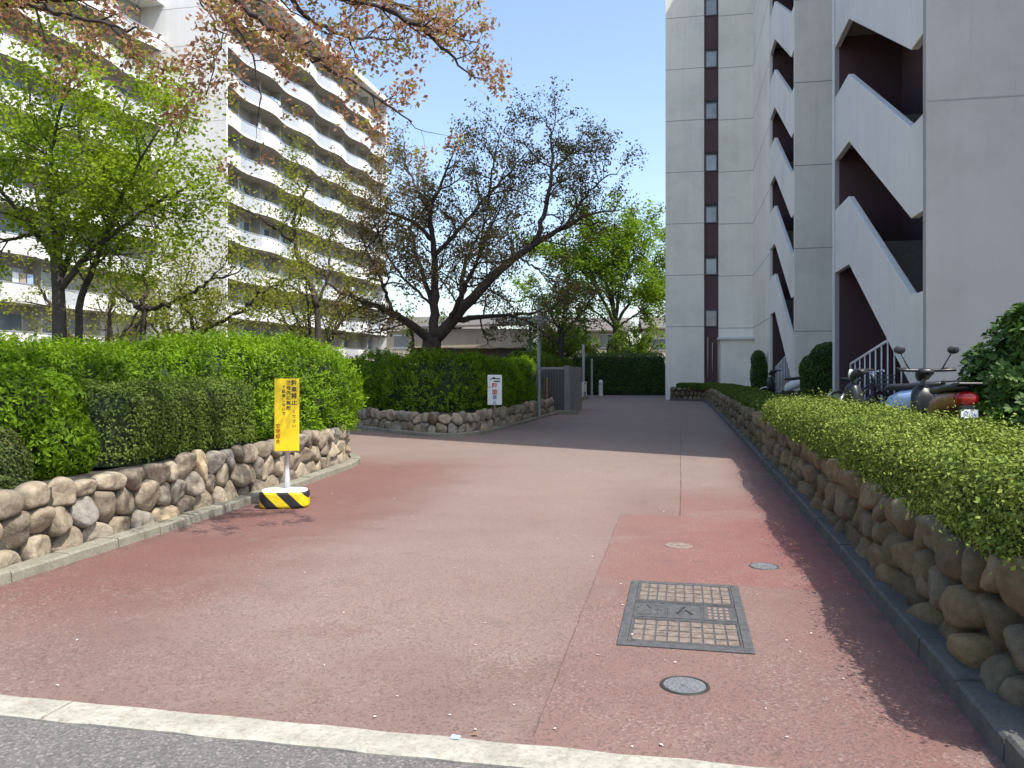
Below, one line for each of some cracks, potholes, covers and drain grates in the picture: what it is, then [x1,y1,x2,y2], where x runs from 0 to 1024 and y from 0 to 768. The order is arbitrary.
manhole cover [749,562,780,570]
manhole cover [660,676,710,696]
manhole cover [617,580,756,654]
